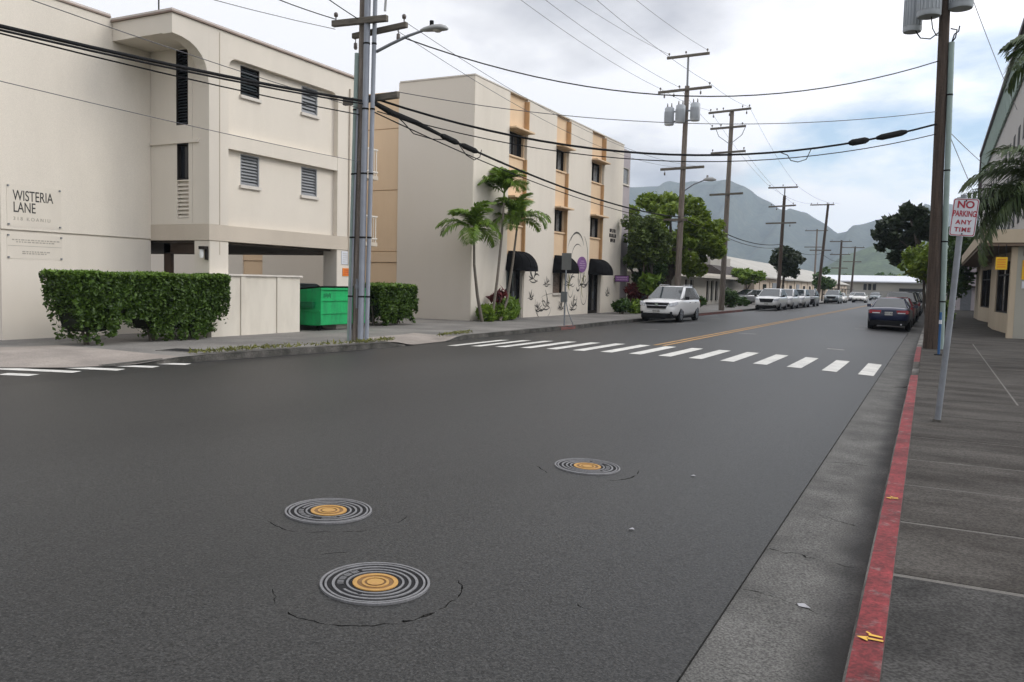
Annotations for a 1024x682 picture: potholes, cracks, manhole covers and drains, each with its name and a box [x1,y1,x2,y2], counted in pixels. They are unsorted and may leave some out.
manhole cover [285,498,372,525]
manhole cover [555,458,620,475]
manhole cover [320,562,430,606]
